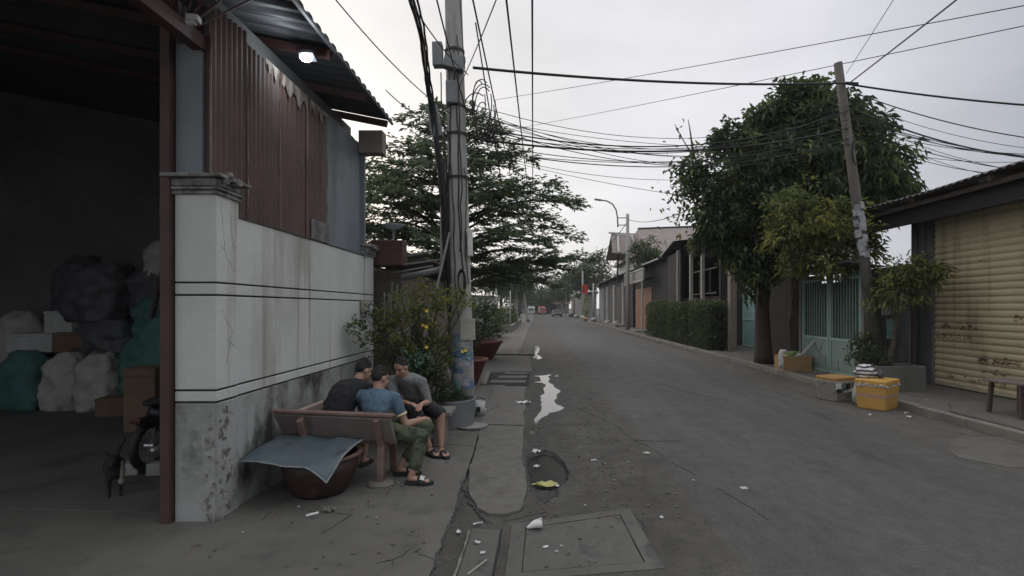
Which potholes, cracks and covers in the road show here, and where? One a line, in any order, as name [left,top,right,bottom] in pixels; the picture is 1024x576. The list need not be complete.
crack [308,511,353,534]
manhole cover [505,508,664,576]
pothole [525,449,570,504]
